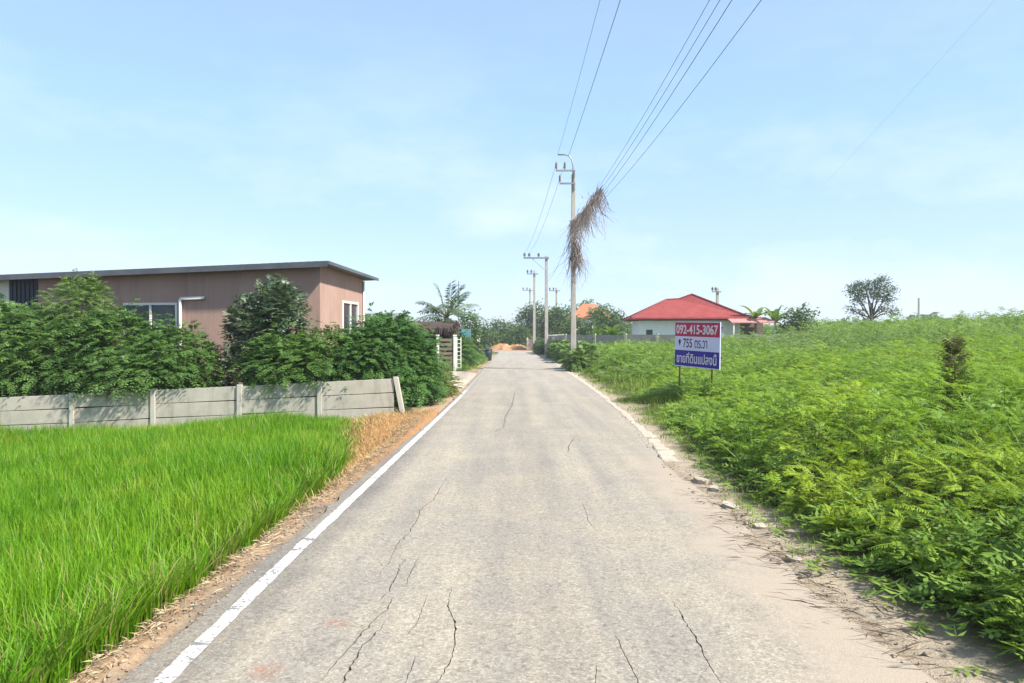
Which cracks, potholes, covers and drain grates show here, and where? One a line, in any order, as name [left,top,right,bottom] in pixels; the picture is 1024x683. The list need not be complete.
crack [436,586,457,683]
crack [673,602,720,681]
crack [322,479,446,683]
